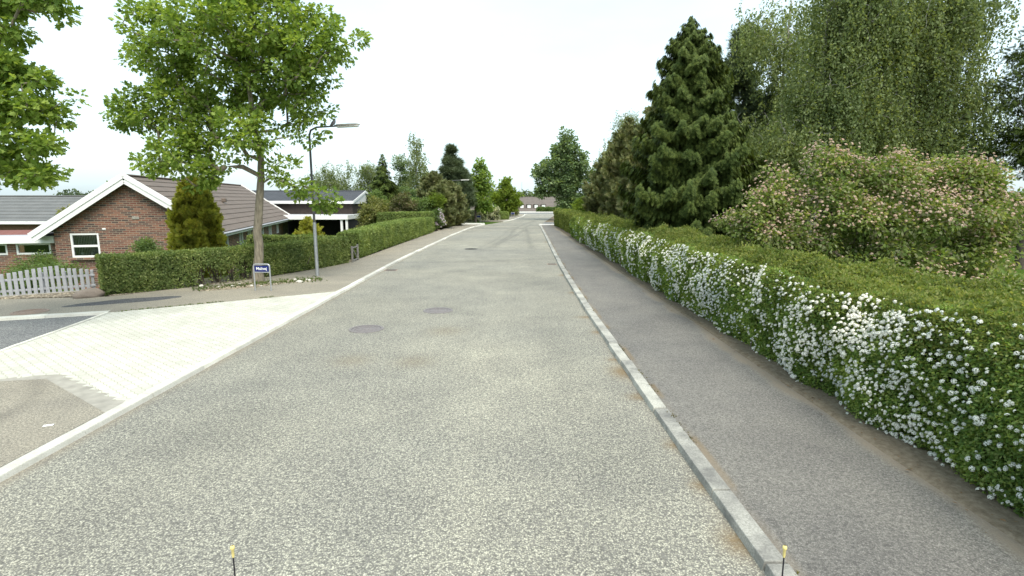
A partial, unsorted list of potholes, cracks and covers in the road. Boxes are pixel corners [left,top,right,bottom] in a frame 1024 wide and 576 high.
manhole cover [349,325,384,333]
